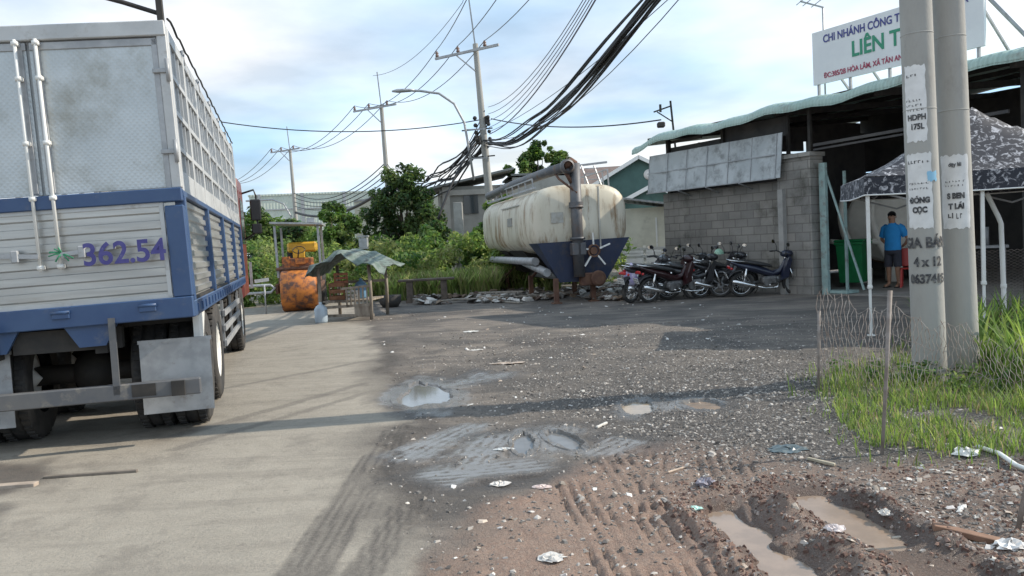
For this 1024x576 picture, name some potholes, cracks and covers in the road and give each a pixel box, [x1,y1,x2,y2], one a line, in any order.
pothole [390,379,460,413]
pothole [508,429,540,458]
pothole [618,397,659,417]
pothole [675,397,730,411]
pothole [538,428,591,452]
